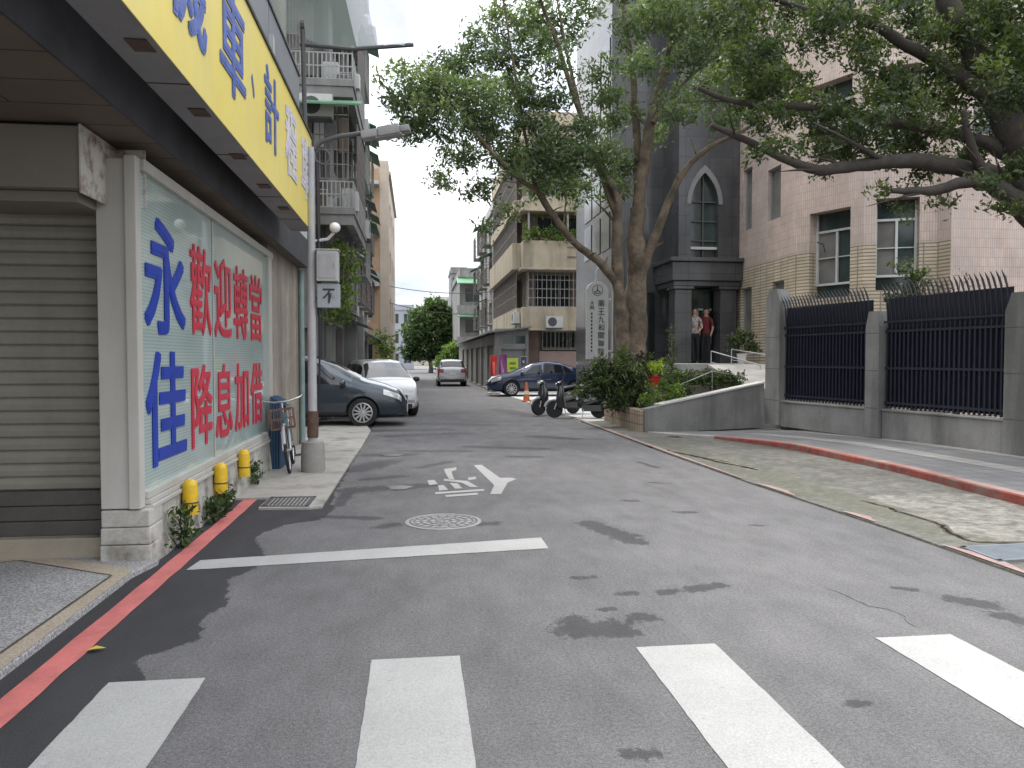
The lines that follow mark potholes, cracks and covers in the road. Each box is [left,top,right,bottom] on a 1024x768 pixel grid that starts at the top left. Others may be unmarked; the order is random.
drain grate [960,543,1024,563]
drain grate [261,496,317,507]
manhole cover [405,513,481,530]
